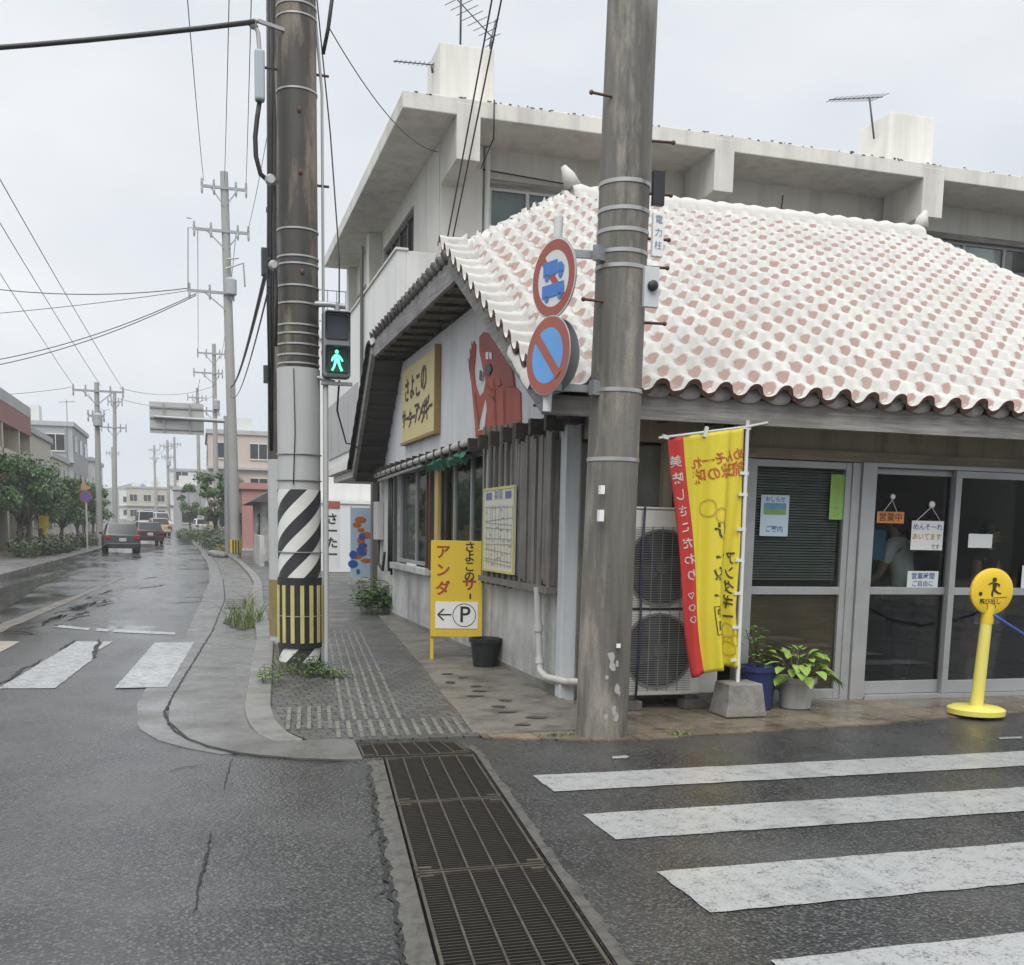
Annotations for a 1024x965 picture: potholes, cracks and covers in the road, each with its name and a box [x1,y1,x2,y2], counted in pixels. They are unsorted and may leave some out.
crack [193,830,212,911]
drain grate [415,863,613,965]
drain grate [396,797,545,876]
crack [0,589,114,683]
drain grate [357,740,470,760]
drain grate [384,754,501,804]
crack [366,764,406,965]
